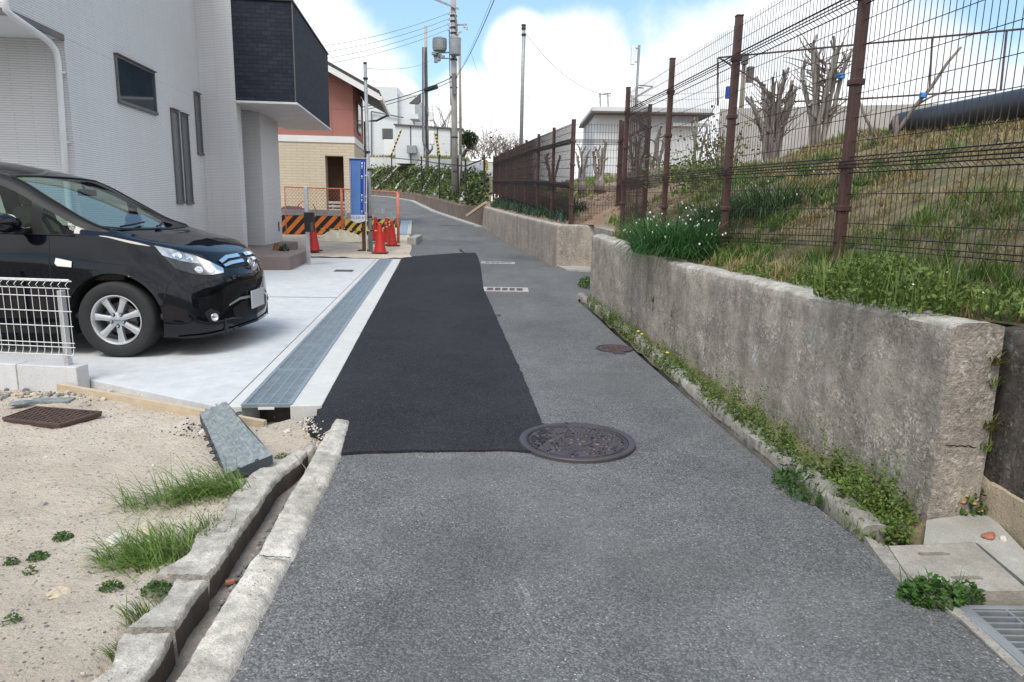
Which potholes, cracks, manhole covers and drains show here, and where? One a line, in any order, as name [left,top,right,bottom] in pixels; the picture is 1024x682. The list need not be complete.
drain grate [316,312,356,326]
manhole cover [596,344,633,354]
drain grate [299,326,346,345]
manhole cover [519,422,636,464]
drain grate [275,344,333,369]
drain grate [329,301,363,312]
drain grate [957,604,1024,667]
drain grate [340,292,370,302]
drain grate [241,369,316,408]
